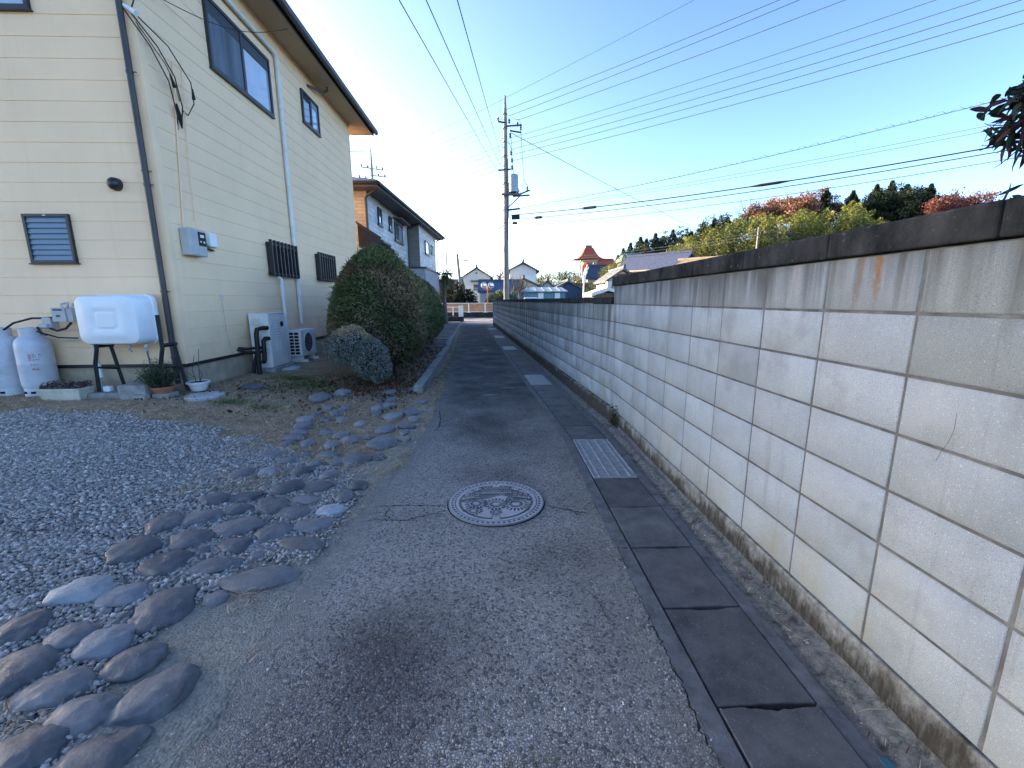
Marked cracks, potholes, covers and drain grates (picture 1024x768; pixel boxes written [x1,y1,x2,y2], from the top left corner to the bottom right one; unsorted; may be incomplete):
manhole cover [447,481,545,527]
drain grate [524,375,552,385]
crack [364,505,446,522]
drain grate [573,439,637,481]
